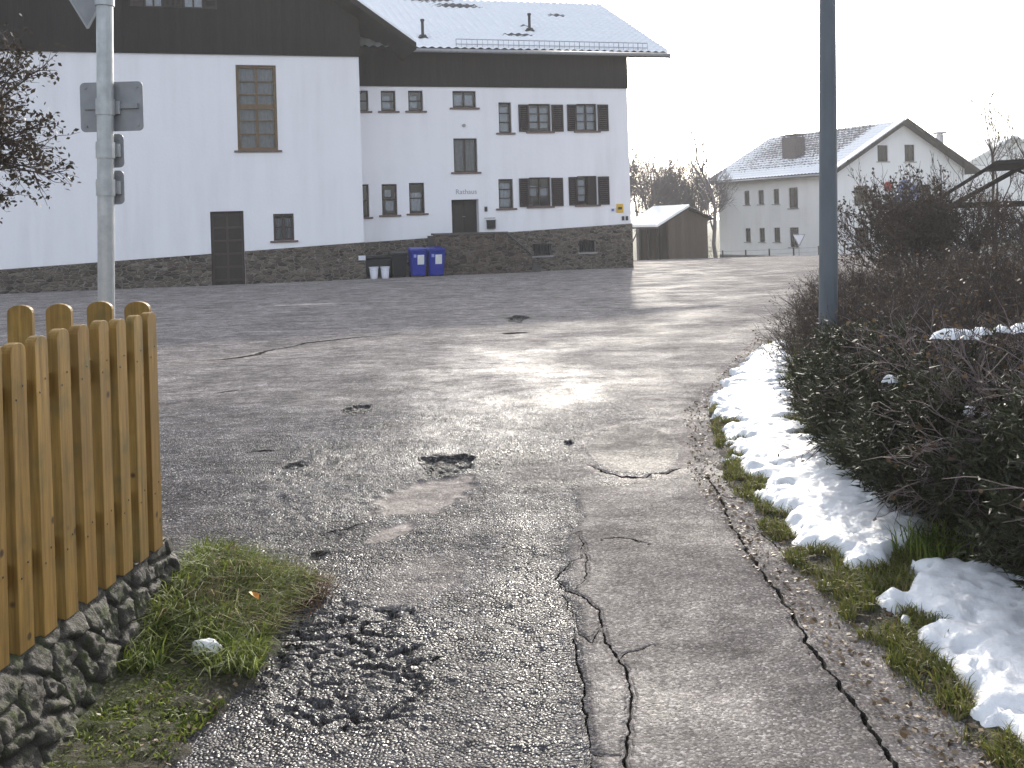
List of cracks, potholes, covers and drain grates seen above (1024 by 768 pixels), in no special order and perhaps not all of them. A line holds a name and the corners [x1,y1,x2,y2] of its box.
pothole [340,403,372,415]
crack [553,532,655,768]
pothole [279,461,306,470]
crack [322,524,363,535]
pothole [503,314,531,323]
pothole [417,453,478,478]
crack [584,464,903,768]
